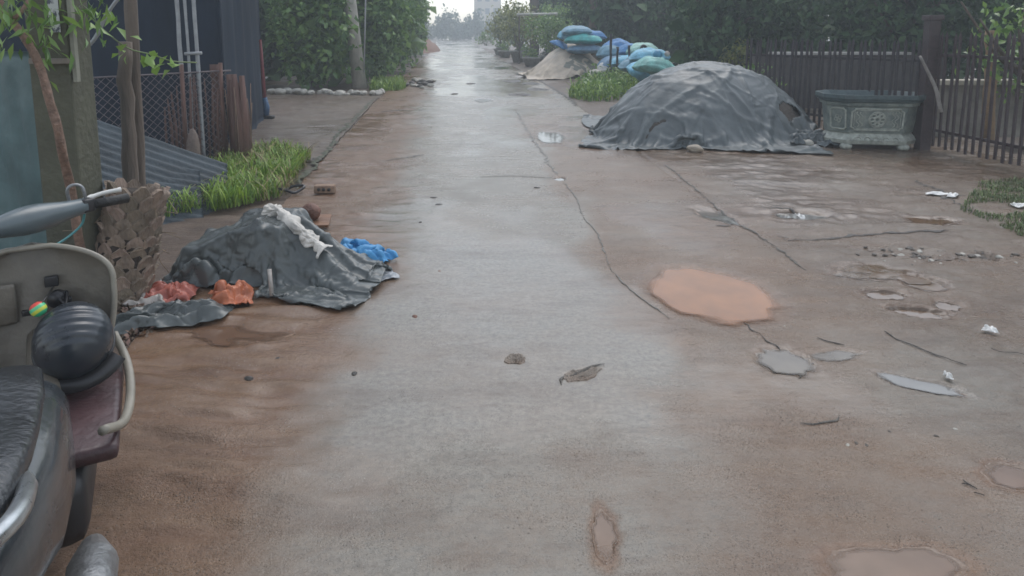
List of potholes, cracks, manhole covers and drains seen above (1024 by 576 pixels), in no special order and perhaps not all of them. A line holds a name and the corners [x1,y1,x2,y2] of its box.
pothole [877,373,970,397]
pothole [827,547,970,576]
pothole [934,301,961,311]
pothole [886,306,952,319]
pothole [592,509,619,565]
pothole [692,208,743,226]
pothole [775,211,827,220]
pothole [901,276,948,292]
pothole [905,216,961,226]
pothole [980,462,1024,492]
pothole [835,263,932,284]
pothole [864,289,906,300]
